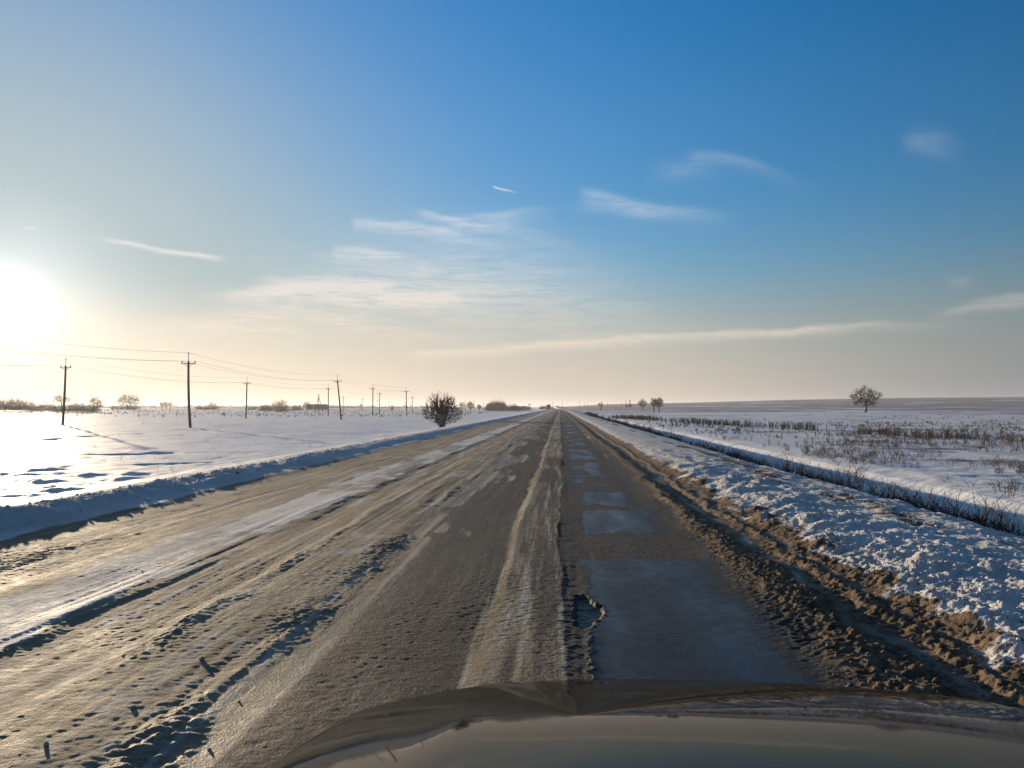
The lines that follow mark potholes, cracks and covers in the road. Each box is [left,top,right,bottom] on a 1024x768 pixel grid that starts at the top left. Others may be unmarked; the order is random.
pothole [571,595,605,630]
